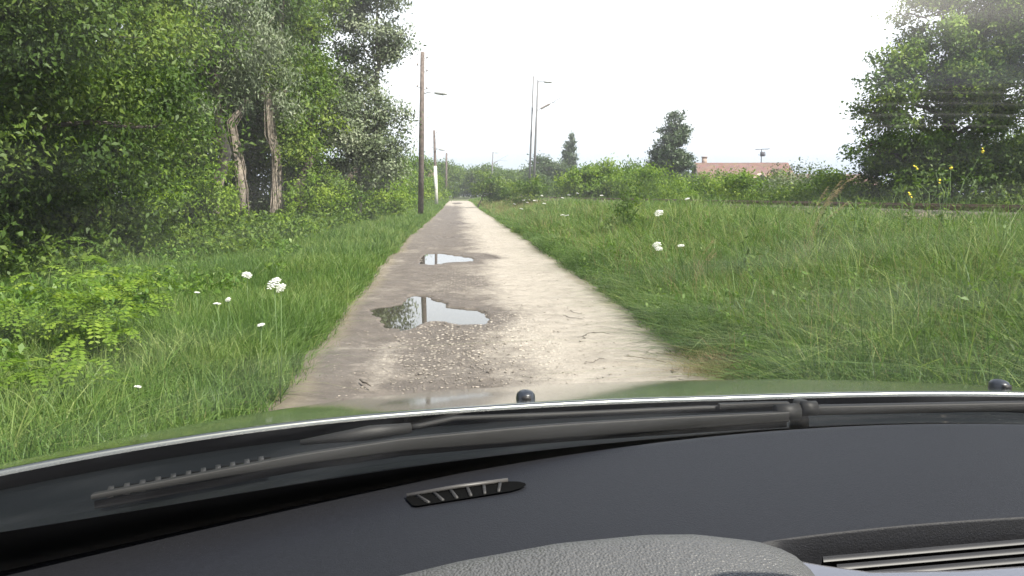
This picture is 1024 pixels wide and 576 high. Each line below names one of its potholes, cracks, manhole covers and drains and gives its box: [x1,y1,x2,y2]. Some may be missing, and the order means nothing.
pothole [417,252,475,265]
pothole [363,293,495,331]
